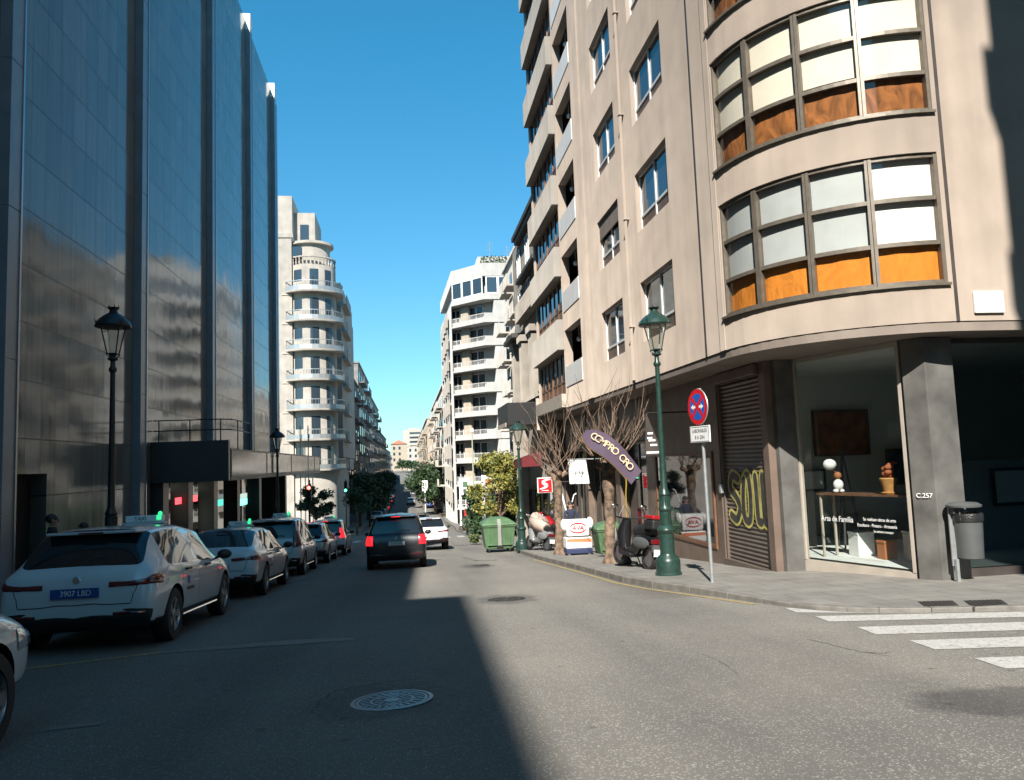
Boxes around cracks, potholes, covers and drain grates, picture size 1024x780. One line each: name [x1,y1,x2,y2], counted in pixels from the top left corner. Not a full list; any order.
manhole cover [350,689,433,711]
